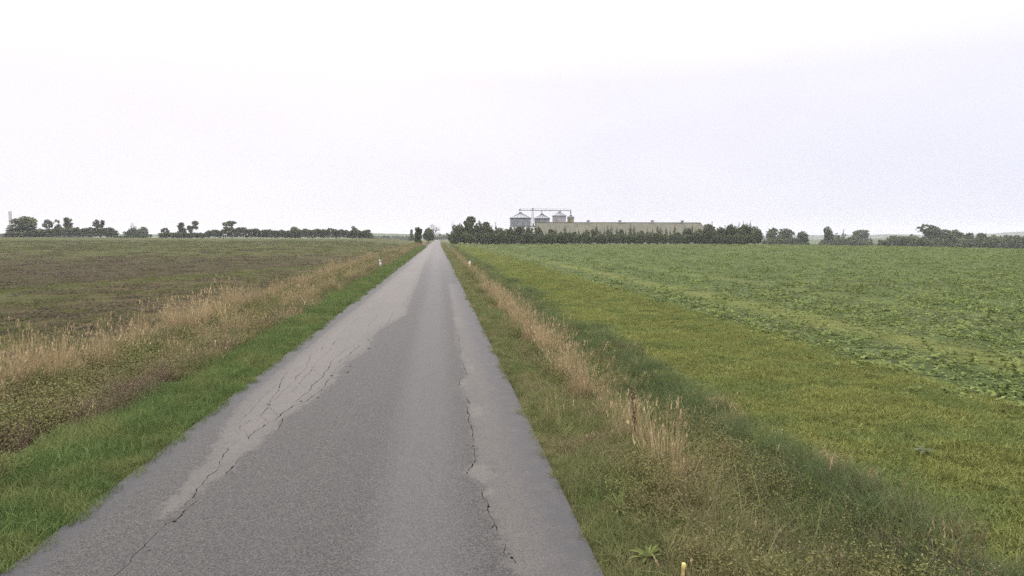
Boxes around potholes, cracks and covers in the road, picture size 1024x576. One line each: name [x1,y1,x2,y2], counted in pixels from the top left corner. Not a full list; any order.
crack [457,335,495,474]
crack [114,450,240,576]
crack [230,318,375,446]
